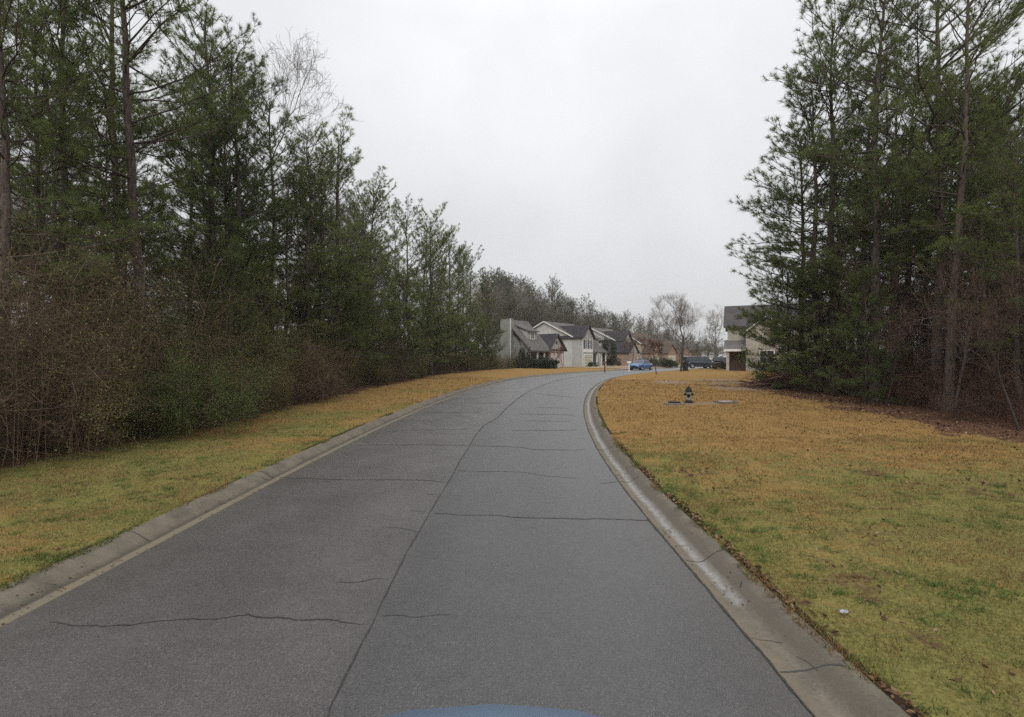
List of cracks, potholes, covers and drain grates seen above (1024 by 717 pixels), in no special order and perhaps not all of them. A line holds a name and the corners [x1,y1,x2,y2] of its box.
crack [385,393,584,450]
crack [56,614,357,627]
crack [444,513,647,521]
